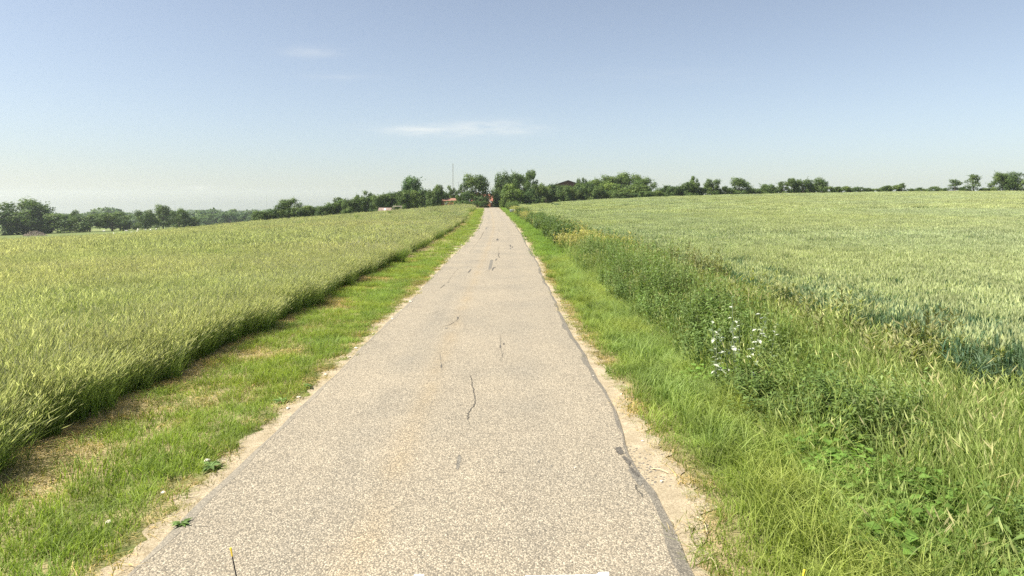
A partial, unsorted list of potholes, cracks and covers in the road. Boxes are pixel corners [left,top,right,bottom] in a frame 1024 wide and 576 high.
crack [461,375,476,425]
